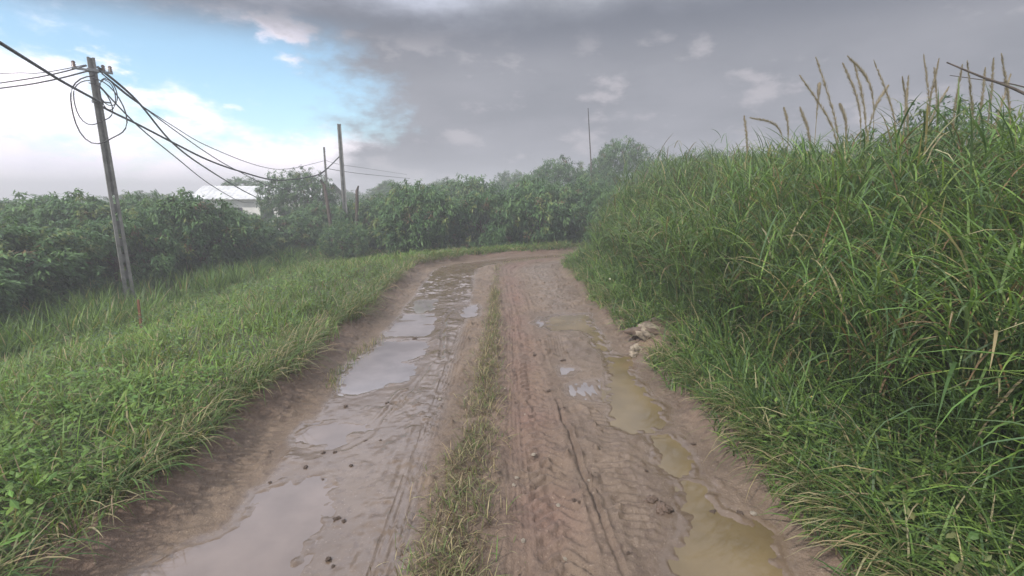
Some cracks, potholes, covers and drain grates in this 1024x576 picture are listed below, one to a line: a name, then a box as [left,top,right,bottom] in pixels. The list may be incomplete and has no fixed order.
pothole [544,313,673,438]
pothole [643,431,706,487]
